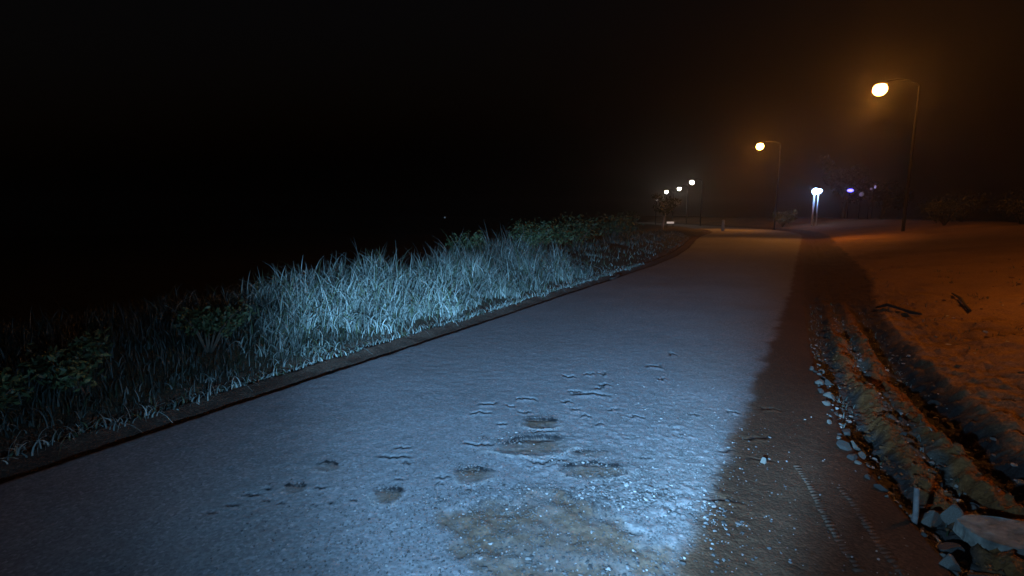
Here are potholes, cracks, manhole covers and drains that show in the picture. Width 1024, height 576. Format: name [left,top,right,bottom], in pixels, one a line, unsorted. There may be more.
pothole [309,460,342,472]
pothole [555,459,637,481]
pothole [451,464,498,486]
pothole [519,417,562,429]
crack [644,352,679,383]
crack [461,370,647,450]
pothole [367,486,405,505]
pothole [491,434,576,457]
